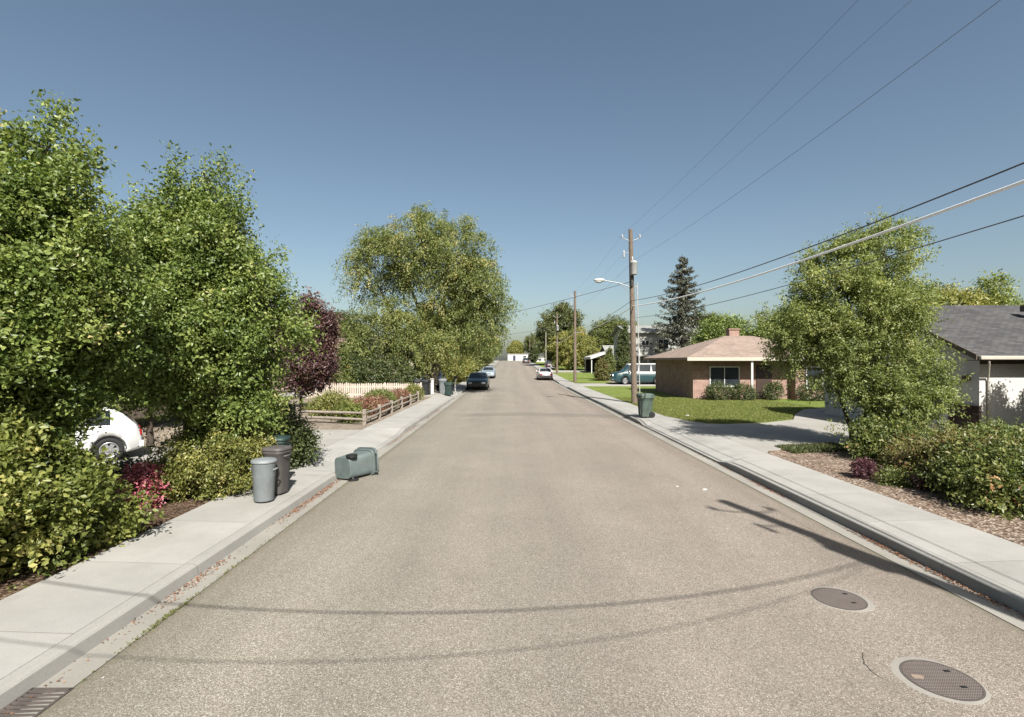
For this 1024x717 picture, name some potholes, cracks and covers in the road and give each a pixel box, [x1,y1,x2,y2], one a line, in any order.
manhole cover [891,657,991,705]
manhole cover [810,587,875,613]
drain grate [0,688,74,717]
